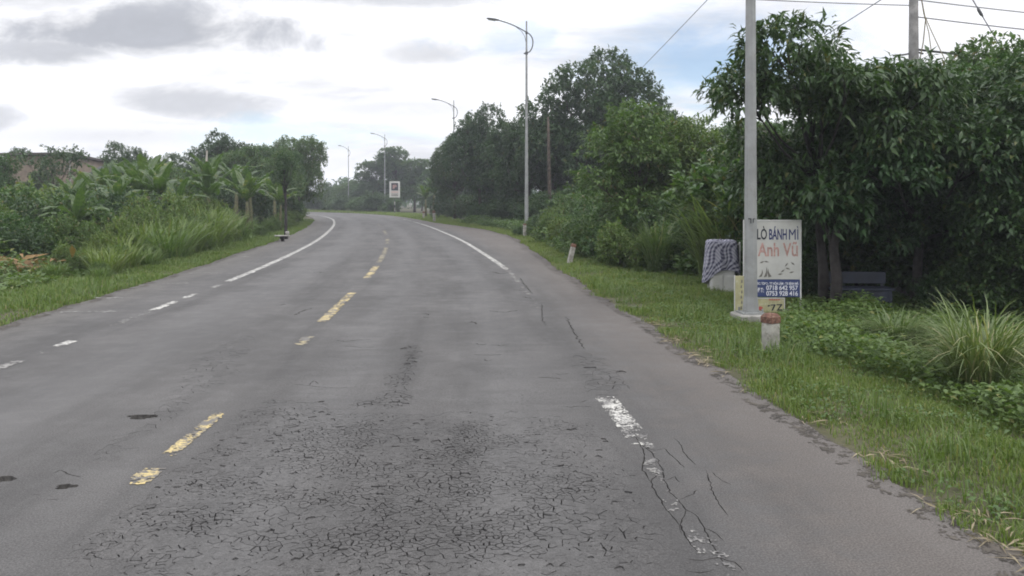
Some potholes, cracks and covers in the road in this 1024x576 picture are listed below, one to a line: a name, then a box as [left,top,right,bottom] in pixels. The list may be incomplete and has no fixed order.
crack [32,319,744,576]
crack [473,279,545,324]
